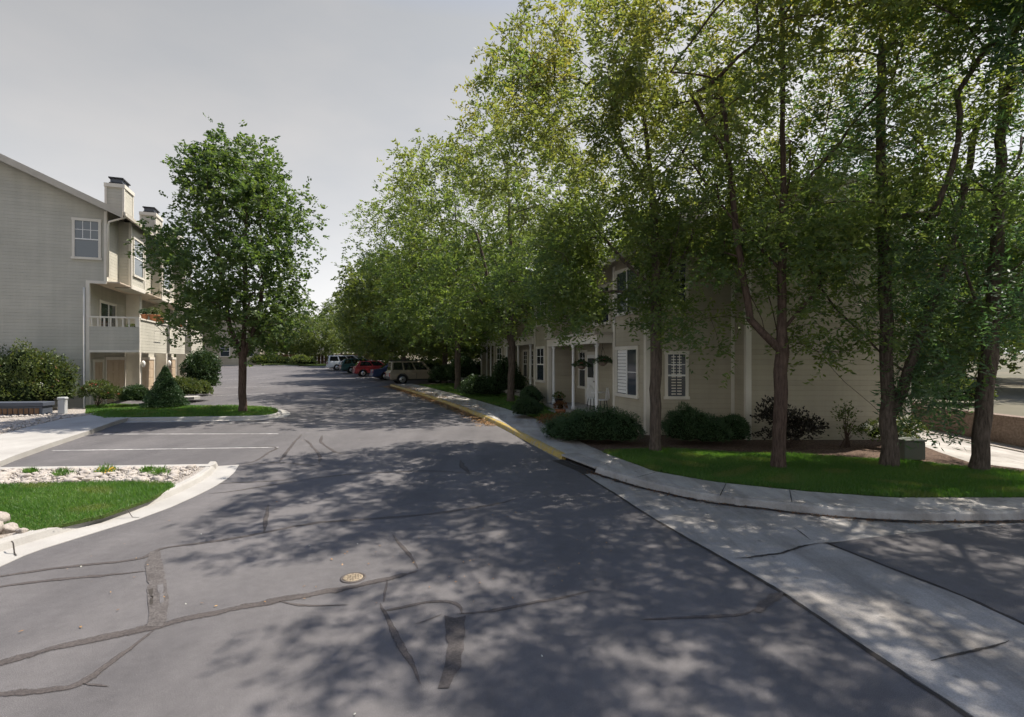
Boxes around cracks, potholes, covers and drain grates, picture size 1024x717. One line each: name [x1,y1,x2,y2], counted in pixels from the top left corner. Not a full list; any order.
manhole cover [340,572,366,584]
crack [383,472,1024,717]
drain grate [553,453,612,474]
